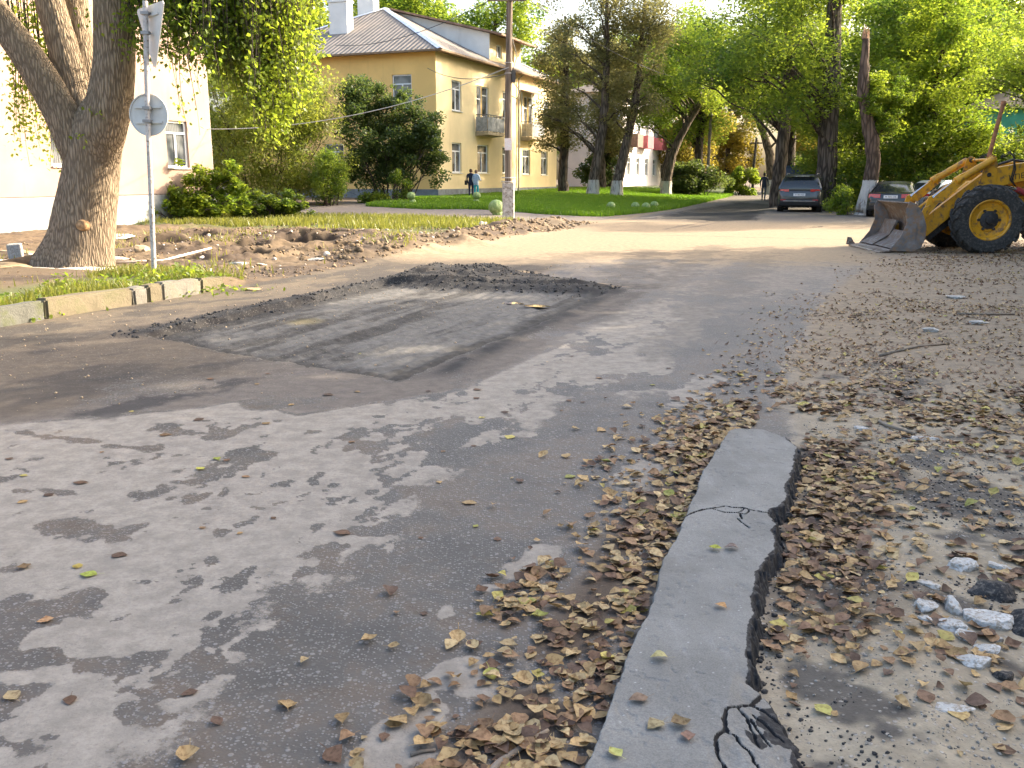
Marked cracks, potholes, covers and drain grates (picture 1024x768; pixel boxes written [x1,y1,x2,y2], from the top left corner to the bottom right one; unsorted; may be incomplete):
crack [713,695,784,768]
crack [686,506,771,526]
